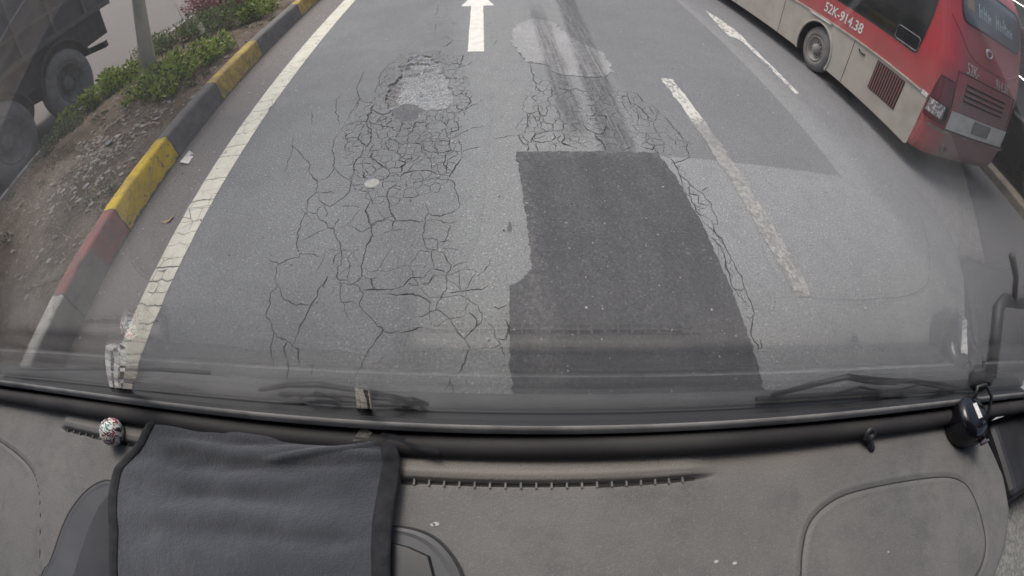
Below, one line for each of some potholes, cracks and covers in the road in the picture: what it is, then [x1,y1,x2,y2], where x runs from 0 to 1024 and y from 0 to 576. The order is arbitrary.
pothole [385,54,456,122]
crack [266,45,511,393]
crack [496,47,763,351]
